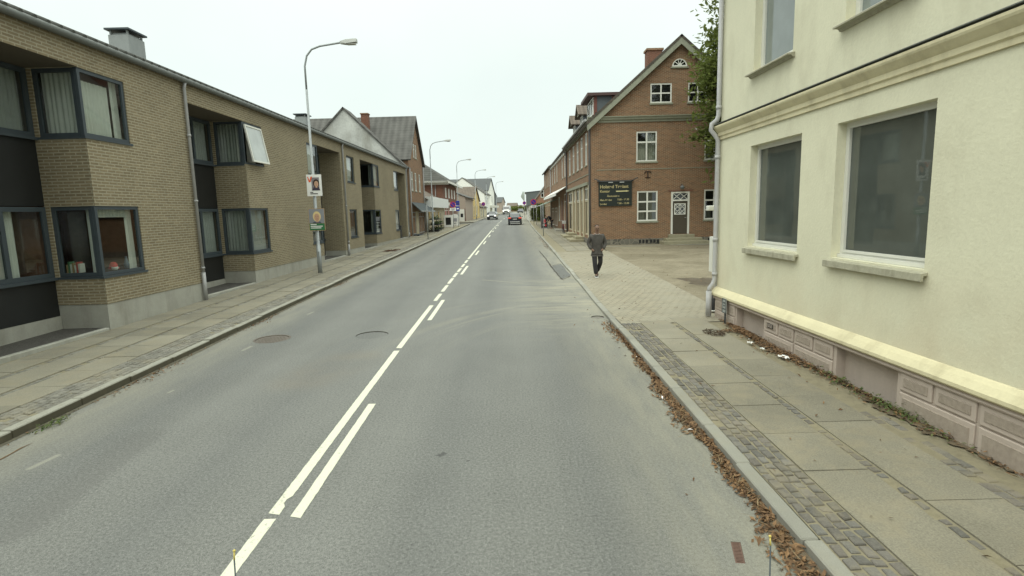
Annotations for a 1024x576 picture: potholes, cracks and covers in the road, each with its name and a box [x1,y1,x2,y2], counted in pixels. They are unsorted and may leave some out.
manhole cover [253,335,291,343]
